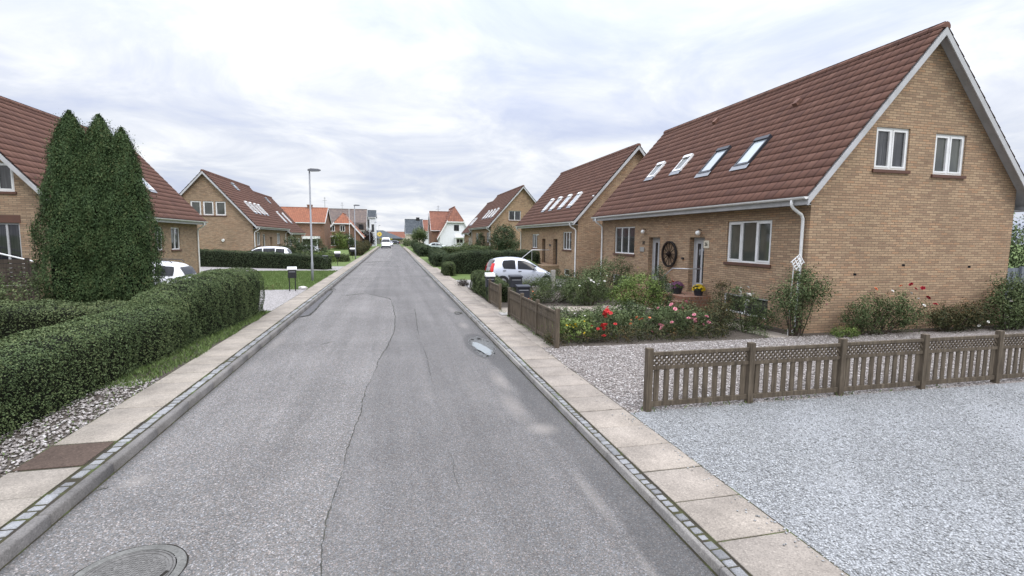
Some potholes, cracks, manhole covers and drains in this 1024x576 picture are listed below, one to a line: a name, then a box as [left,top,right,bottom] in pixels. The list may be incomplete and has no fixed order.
manhole cover [72,544,189,576]
